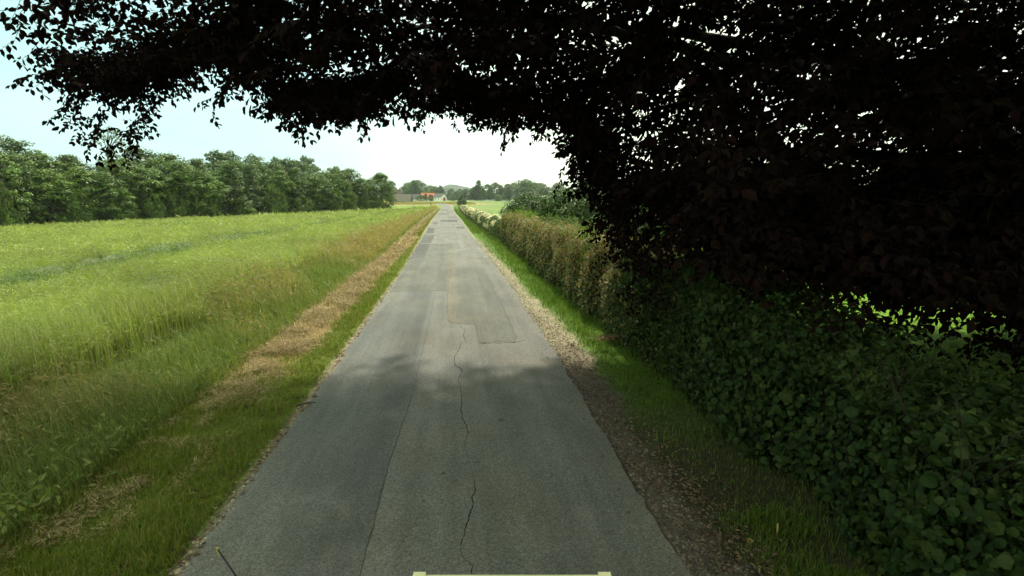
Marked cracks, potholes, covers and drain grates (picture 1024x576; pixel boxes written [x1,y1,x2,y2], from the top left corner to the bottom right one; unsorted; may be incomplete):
crack [454,327,476,575]
